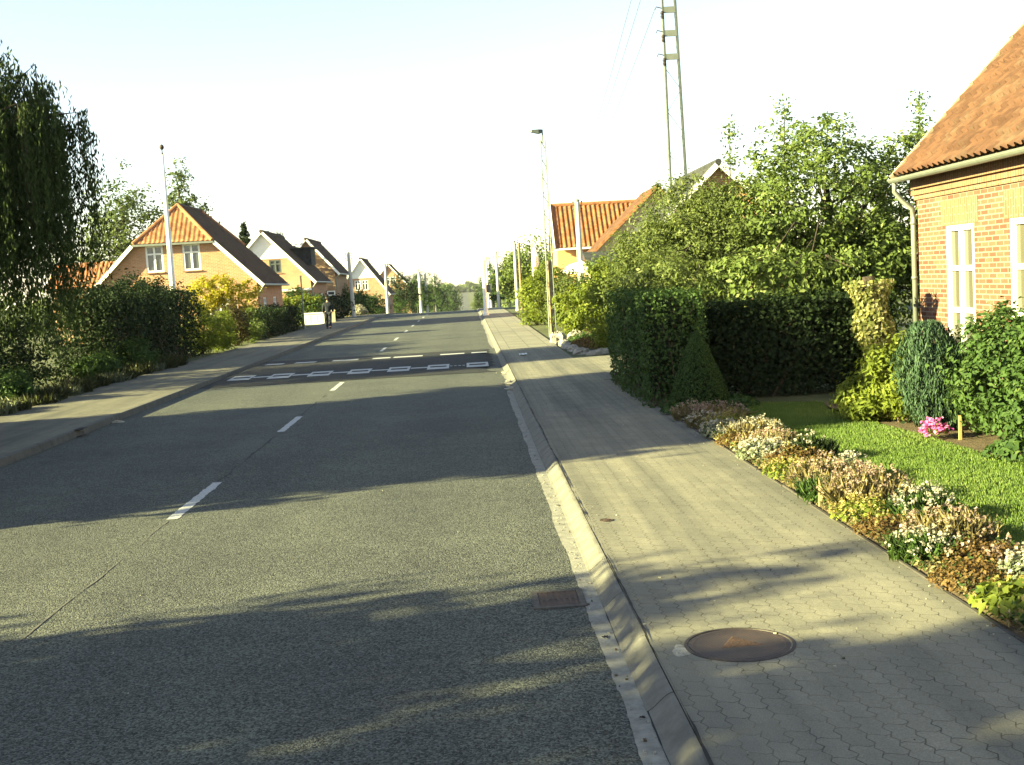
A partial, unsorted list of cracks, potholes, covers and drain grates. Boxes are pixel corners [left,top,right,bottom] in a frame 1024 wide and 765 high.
manhole cover [684,628,796,662]
